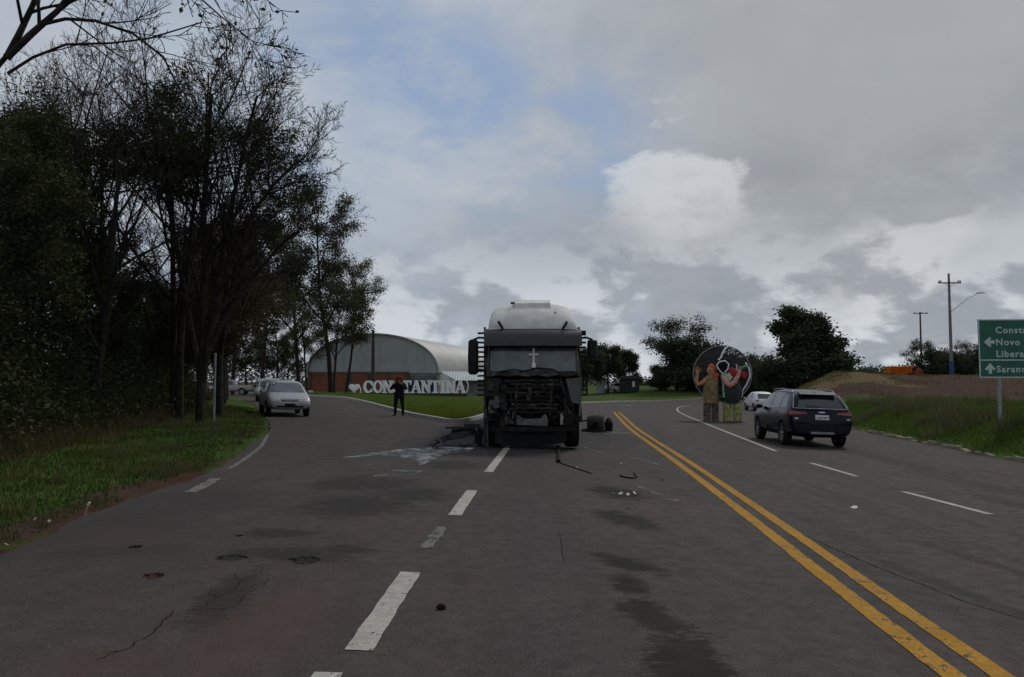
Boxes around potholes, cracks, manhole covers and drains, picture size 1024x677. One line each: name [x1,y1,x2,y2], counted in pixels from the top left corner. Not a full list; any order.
pothole [288,556,320,565]
crack [194,567,271,611]
crack [97,610,174,660]
crack [809,537,1024,620]
